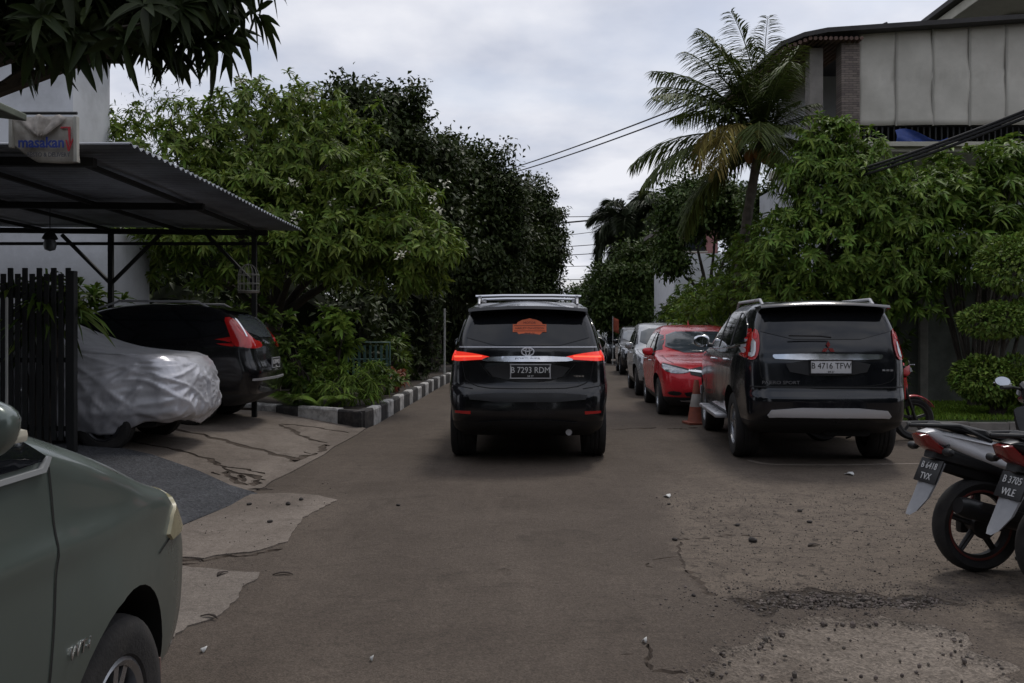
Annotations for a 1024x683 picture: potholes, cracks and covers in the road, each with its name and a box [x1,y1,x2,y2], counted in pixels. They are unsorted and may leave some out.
crack [644,534,760,596]
crack [627,644,686,674]
pothole [726,587,964,618]
crack [129,424,348,486]
